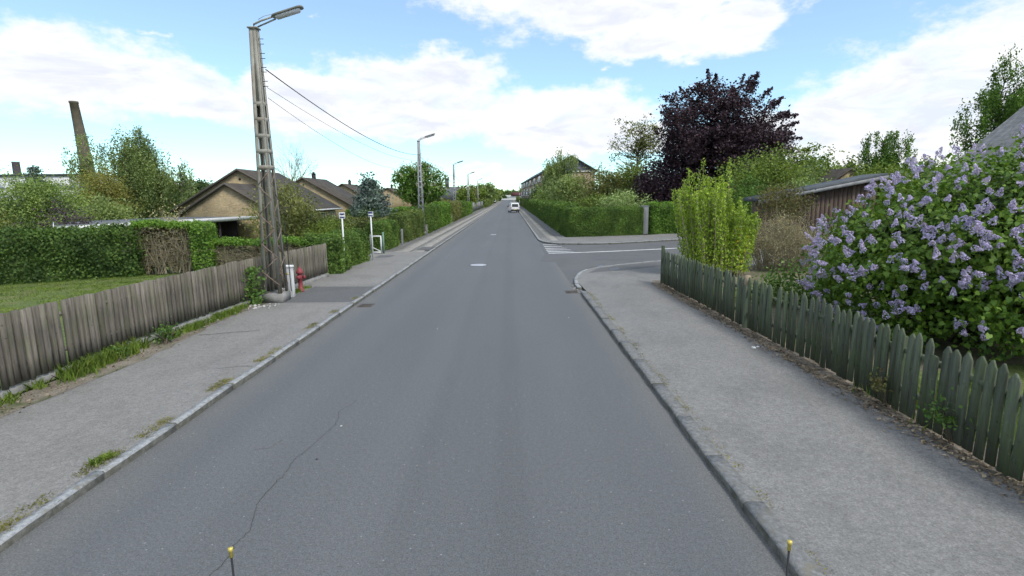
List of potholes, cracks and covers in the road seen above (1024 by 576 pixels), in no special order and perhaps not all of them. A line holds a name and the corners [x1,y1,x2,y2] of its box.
crack [209,403,353,576]
